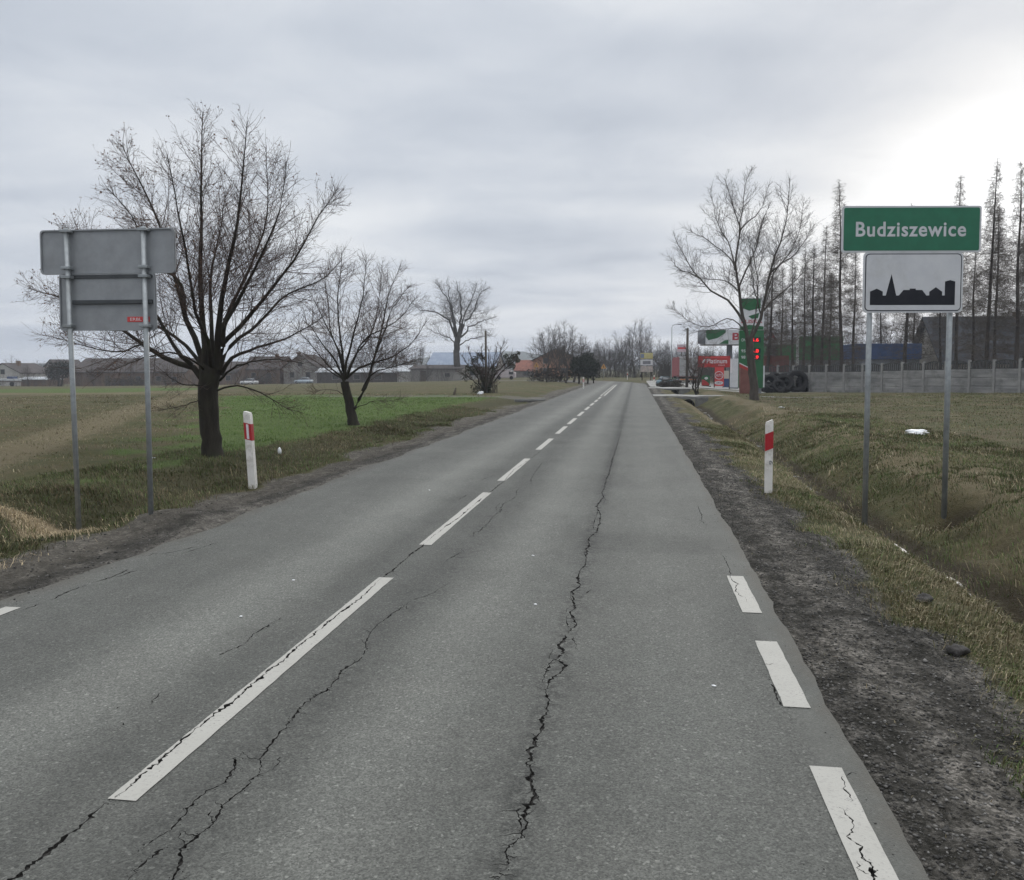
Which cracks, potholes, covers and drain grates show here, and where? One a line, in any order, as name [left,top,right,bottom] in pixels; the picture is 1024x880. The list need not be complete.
crack [128,583,446,880]
crack [26,569,134,609]
crack [841,772,877,880]
crack [489,429,622,880]
